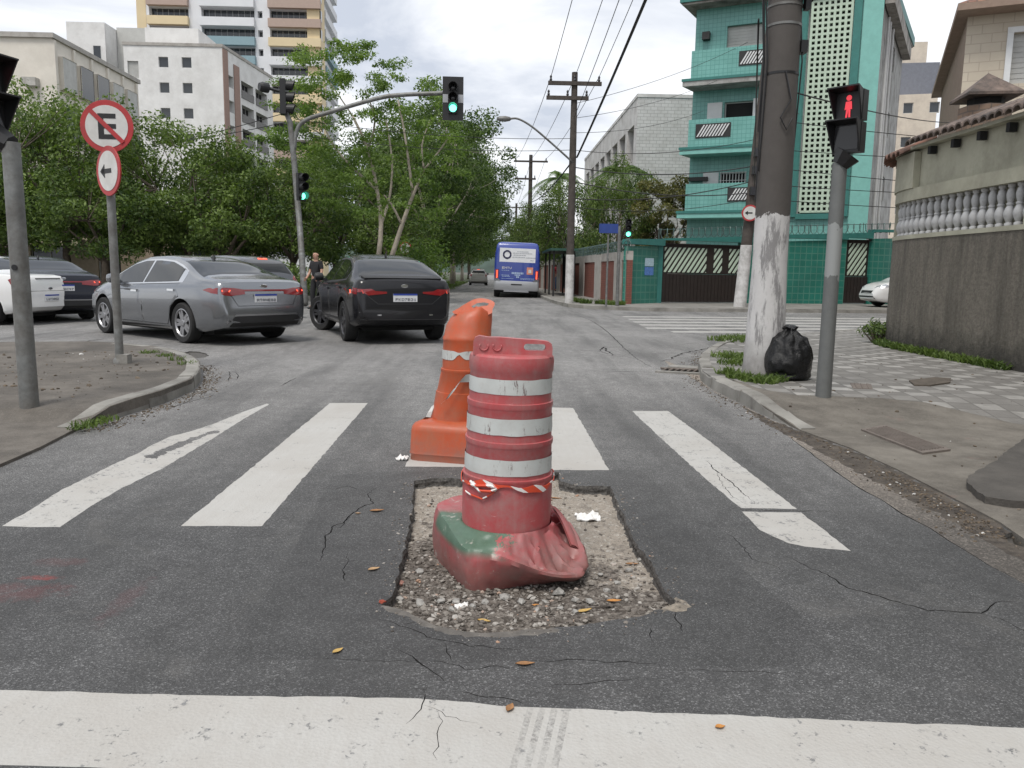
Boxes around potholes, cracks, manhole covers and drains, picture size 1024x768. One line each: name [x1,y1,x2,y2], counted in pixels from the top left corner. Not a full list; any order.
pothole [382,472,676,633]
crack [311,619,799,758]
crack [791,558,1024,631]
crack [320,486,374,581]
drain grate [655,365,699,375]
manhole cover [861,425,951,455]
